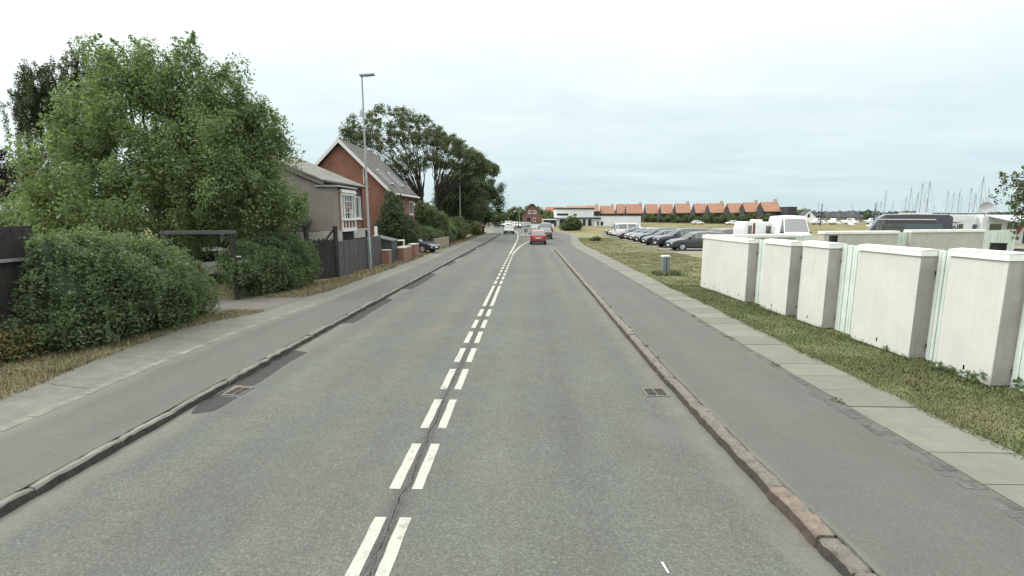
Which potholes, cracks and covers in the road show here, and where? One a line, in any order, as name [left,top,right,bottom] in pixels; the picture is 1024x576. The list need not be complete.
crack [362,364,462,576]
drain grate [221,386,254,396]
drain grate [641,388,671,397]
